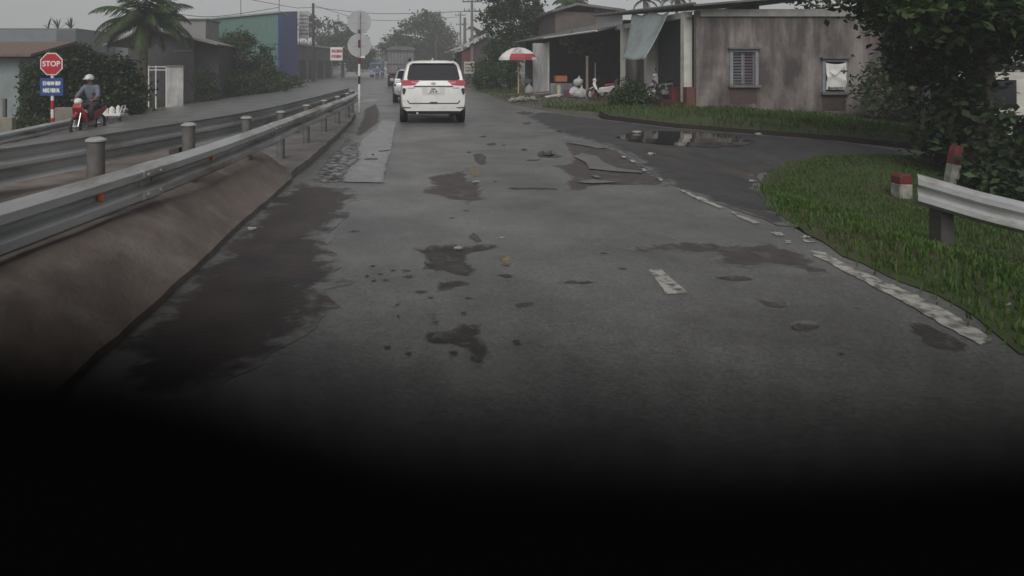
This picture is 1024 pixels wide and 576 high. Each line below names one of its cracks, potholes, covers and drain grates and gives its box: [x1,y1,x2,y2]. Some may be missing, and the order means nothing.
pothole [537,150,562,158]
pothole [412,243,499,276]
pothole [754,297,790,308]
pothole [423,309,490,369]
pothole [788,321,819,333]
